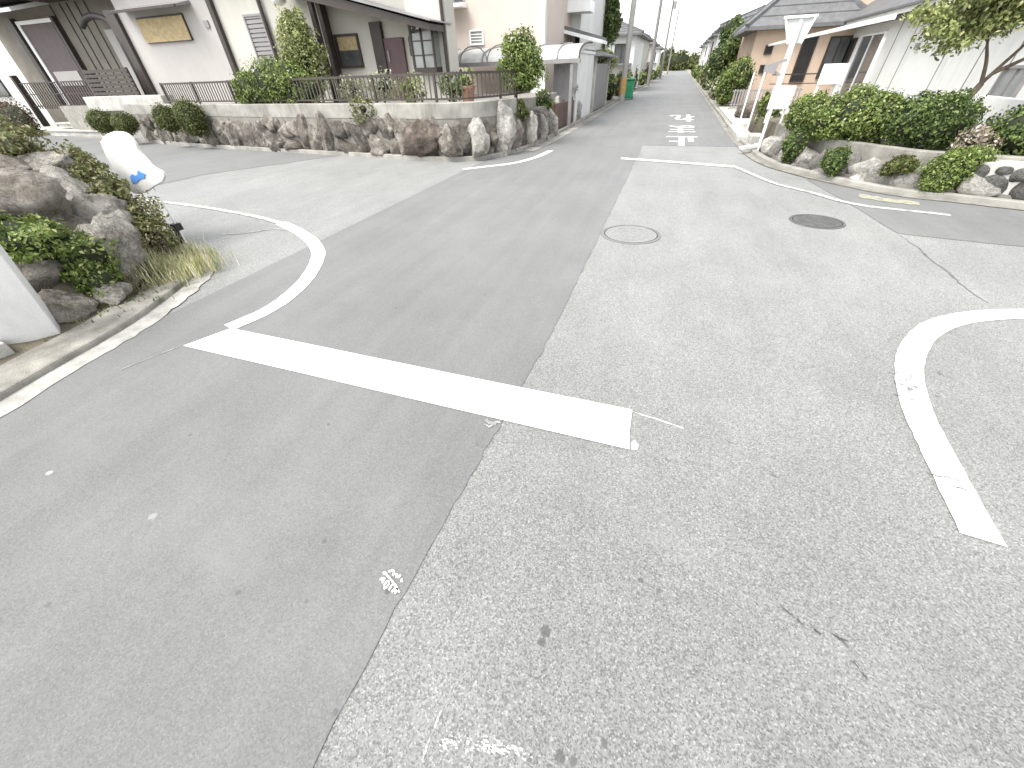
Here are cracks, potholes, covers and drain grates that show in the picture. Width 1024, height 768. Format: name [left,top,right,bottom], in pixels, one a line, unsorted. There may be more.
manhole cover [601,225,661,245]
manhole cover [789,214,846,229]
crack [901,236,988,303]
crack [780,606,869,681]
